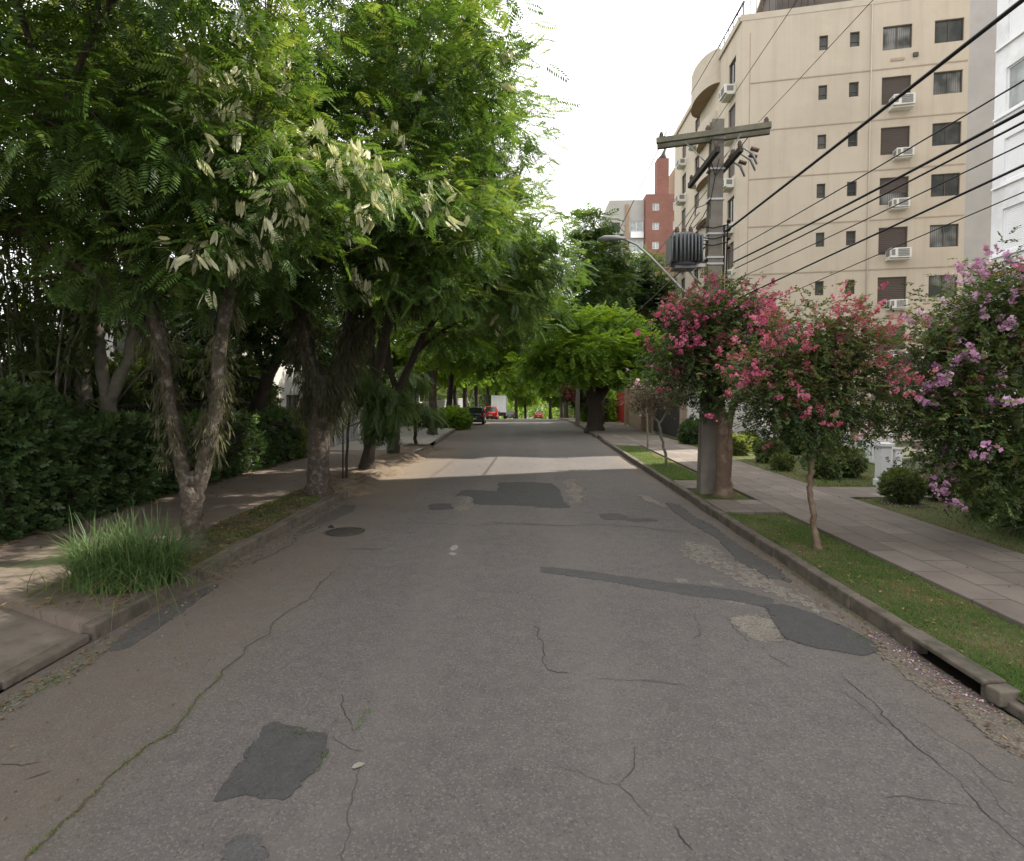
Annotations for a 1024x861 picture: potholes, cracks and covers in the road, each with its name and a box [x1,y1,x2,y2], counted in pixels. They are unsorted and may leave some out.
crack [533,625,570,673]
drain grate [902,629,1022,711]
crack [842,673,1024,846]
crack [560,747,649,816]
manhole cover [322,526,367,537]
